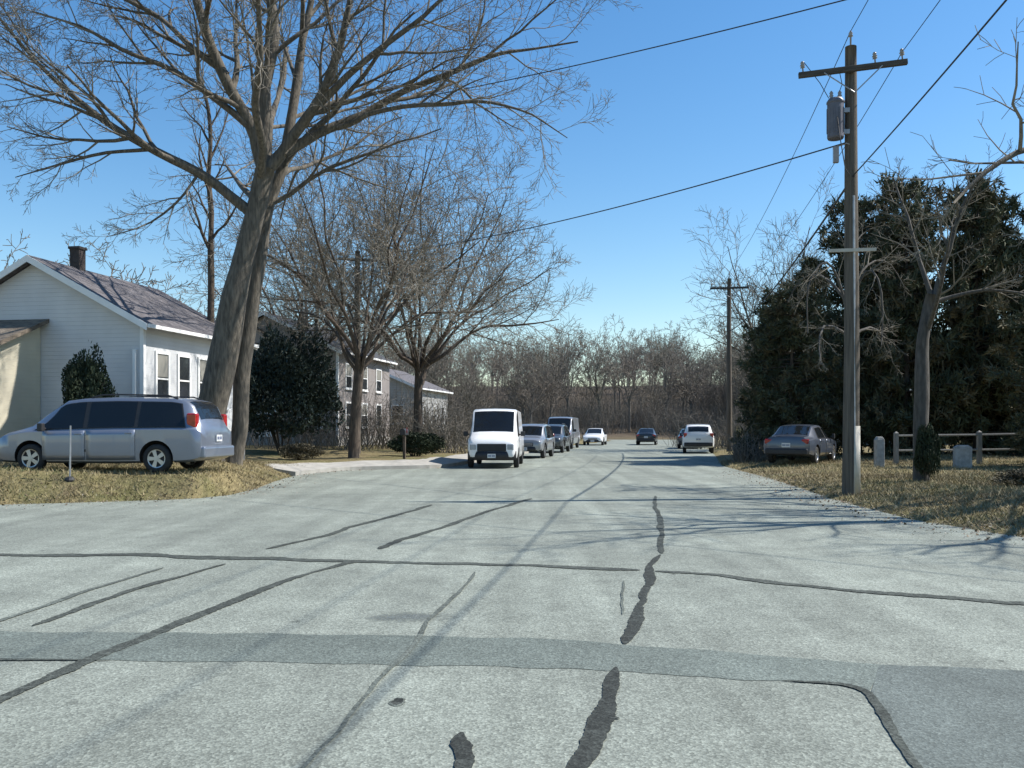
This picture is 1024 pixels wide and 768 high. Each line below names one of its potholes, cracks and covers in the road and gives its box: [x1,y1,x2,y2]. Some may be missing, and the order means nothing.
pothole [388,697,406,707]
